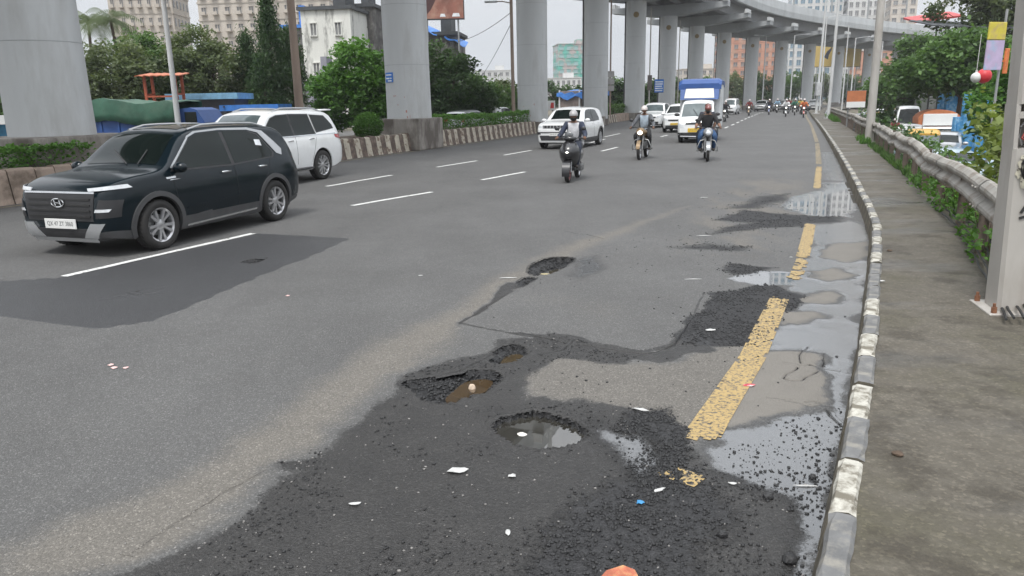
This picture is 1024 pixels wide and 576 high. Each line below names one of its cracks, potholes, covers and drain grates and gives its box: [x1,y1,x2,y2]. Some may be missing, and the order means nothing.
pothole [484,408,596,452]
crack [123,470,269,557]
crack [766,346,843,427]
pothole [481,342,532,366]
pothole [524,256,578,277]
pothole [395,367,510,407]
